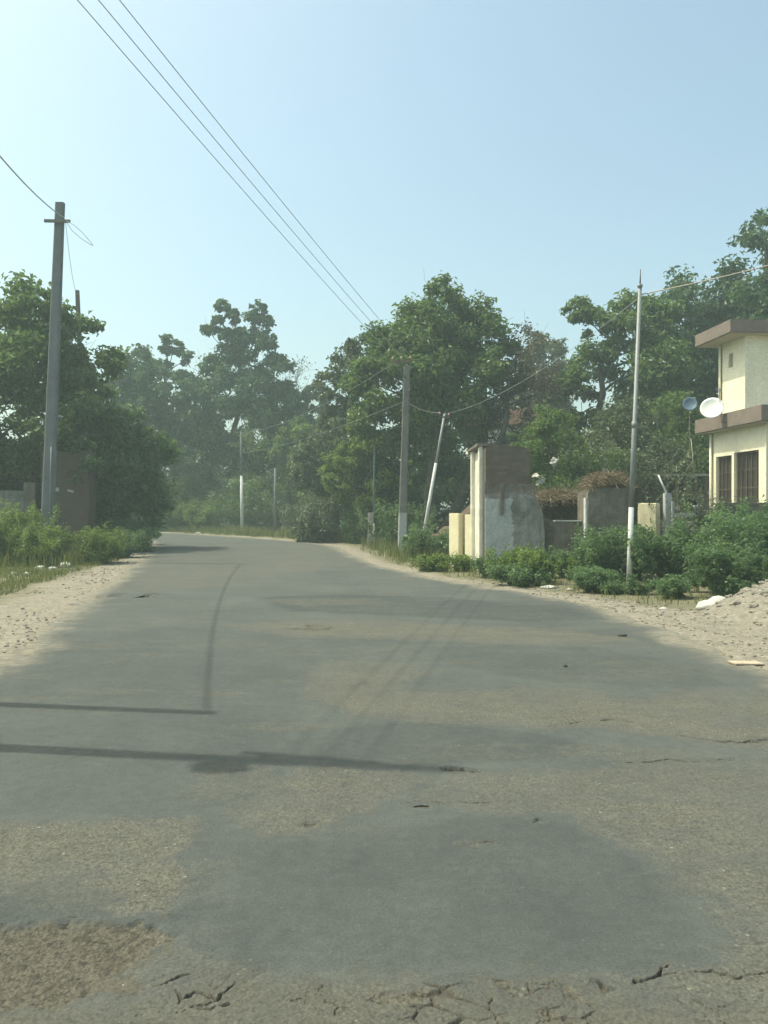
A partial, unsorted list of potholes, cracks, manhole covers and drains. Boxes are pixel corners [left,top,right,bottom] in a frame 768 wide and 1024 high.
crack [610,734,768,766]
pothole [0,909,200,1024]
crack [111,963,604,1024]
pothole [292,819,322,830]
crack [623,959,768,1024]
pothole [434,765,487,774]
